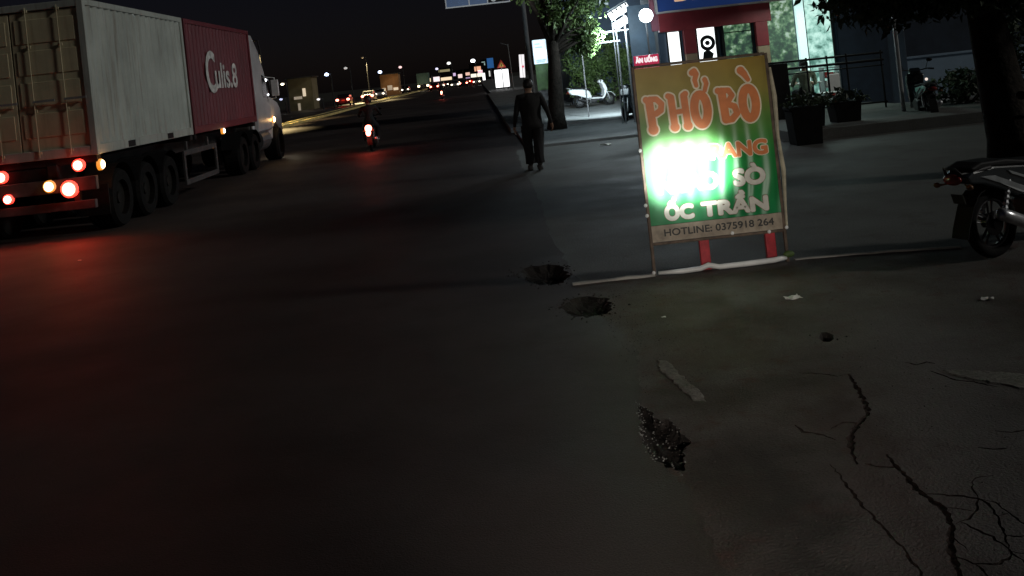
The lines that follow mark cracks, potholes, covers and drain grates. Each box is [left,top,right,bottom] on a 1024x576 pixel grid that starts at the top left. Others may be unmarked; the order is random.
crack [910,362,996,387]
crack [795,373,1024,576]
pothole [508,261,576,289]
pothole [546,294,631,323]
pothole [634,401,691,476]
